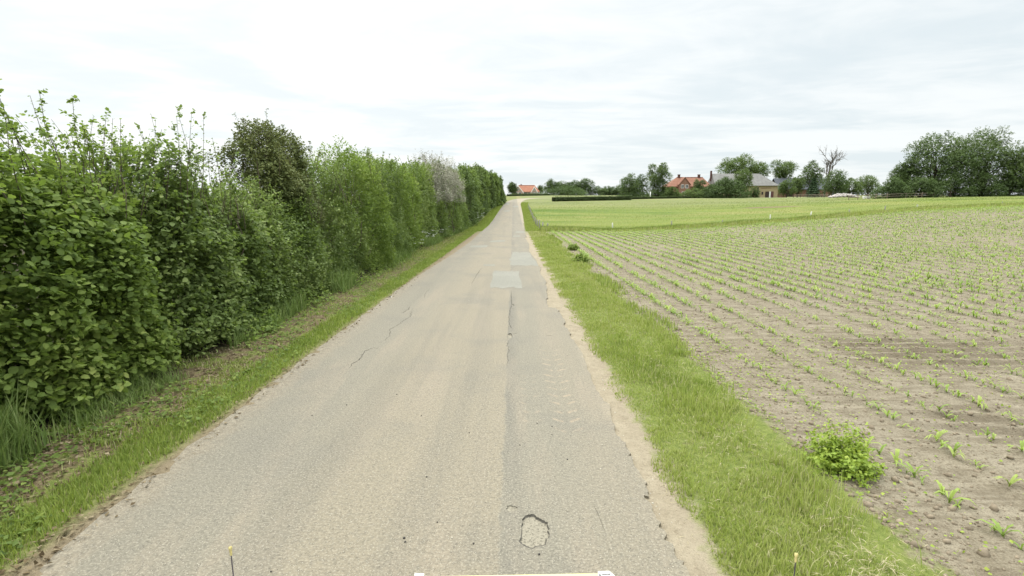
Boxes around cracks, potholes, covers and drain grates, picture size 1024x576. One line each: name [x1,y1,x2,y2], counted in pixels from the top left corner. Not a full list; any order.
pothole [519,514,550,549]
